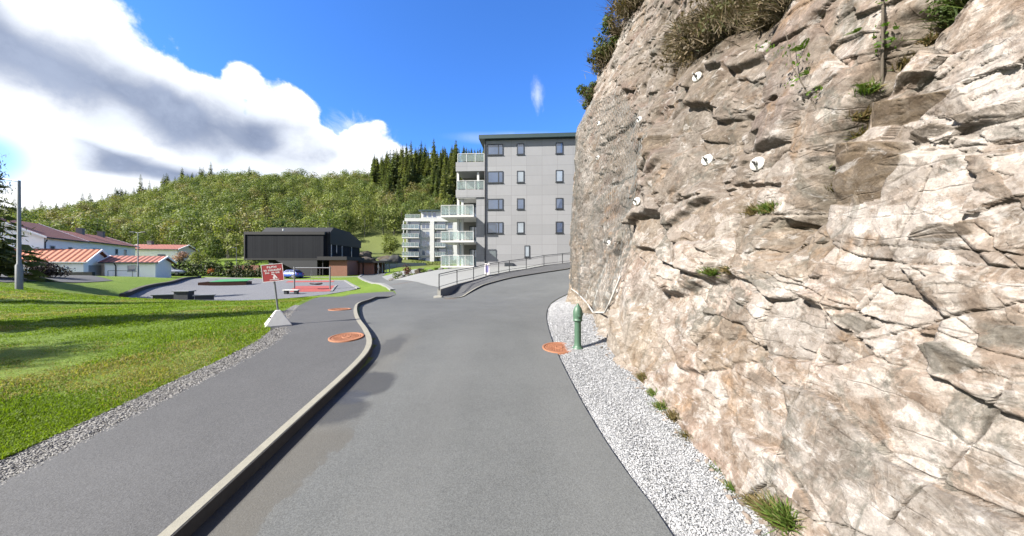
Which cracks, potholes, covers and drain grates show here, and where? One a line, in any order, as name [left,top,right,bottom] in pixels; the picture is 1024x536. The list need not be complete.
manhole cover [542,342,573,355]
manhole cover [328,332,364,343]
